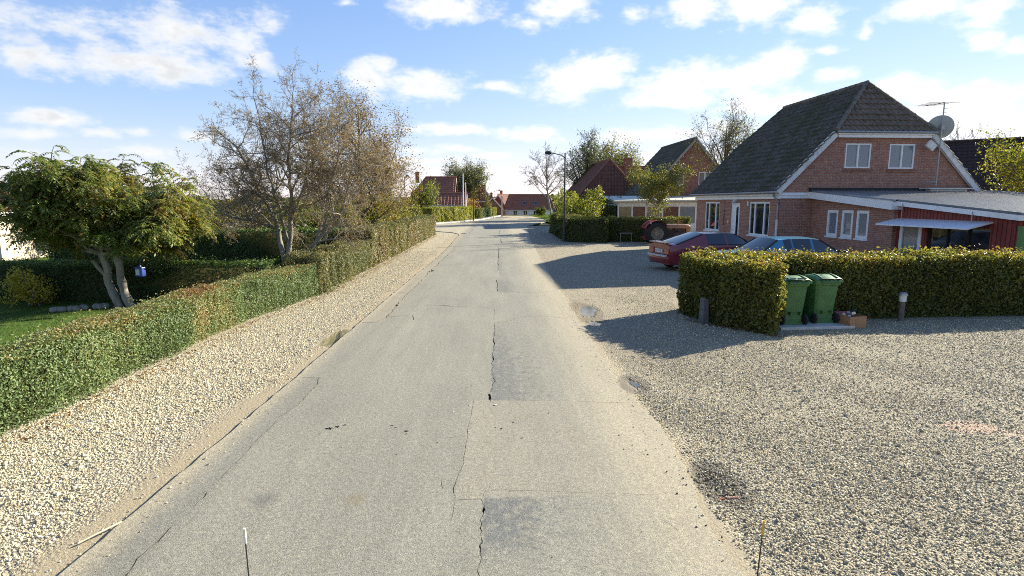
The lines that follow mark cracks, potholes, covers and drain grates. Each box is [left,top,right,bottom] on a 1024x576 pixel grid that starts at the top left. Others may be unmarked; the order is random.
pothole [691,466,751,503]
pothole [576,303,601,319]
crack [477,499,485,576]
pothole [620,375,649,392]
